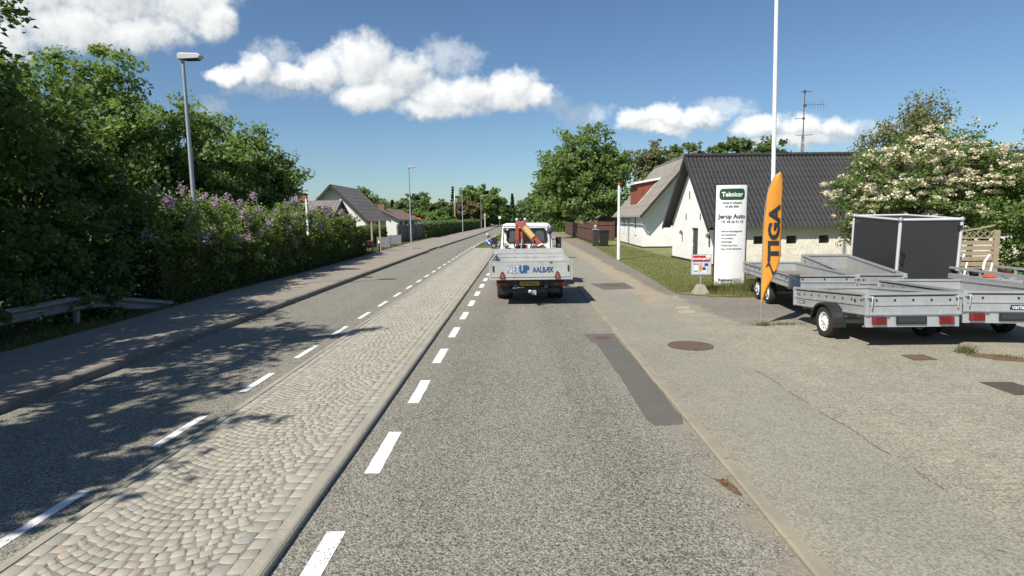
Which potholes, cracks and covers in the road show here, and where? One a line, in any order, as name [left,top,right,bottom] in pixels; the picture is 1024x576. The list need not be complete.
manhole cover [584,333,620,342]
manhole cover [980,382,1024,395]
crack [755,370,943,488]
manhole cover [668,341,714,351]
manhole cover [591,282,635,290]
